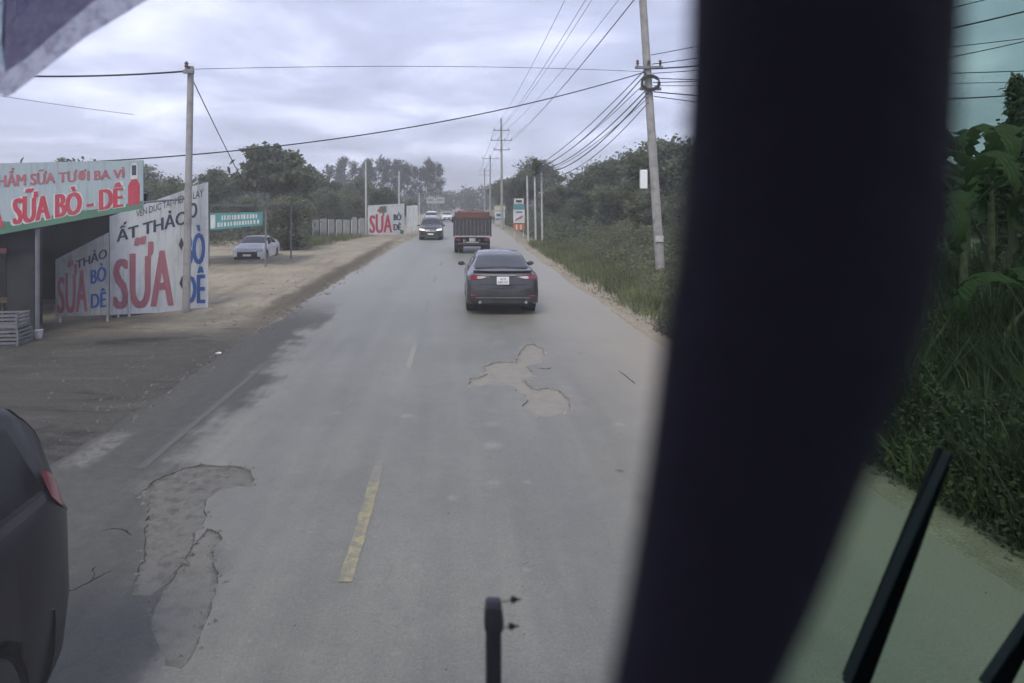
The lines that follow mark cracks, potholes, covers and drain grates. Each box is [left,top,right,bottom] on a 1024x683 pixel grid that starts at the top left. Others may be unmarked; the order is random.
pothole [468,342,574,417]
pothole [144,529,229,669]
pothole [120,462,257,598]
